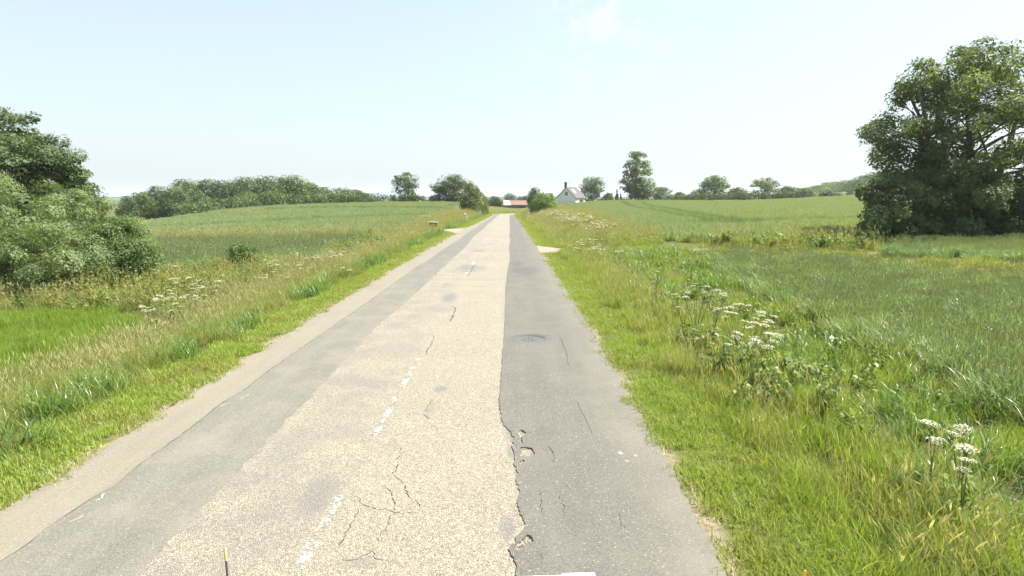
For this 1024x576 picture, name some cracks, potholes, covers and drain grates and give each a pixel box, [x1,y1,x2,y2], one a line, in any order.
pothole [520,447,535,457]
pothole [513,535,534,550]
